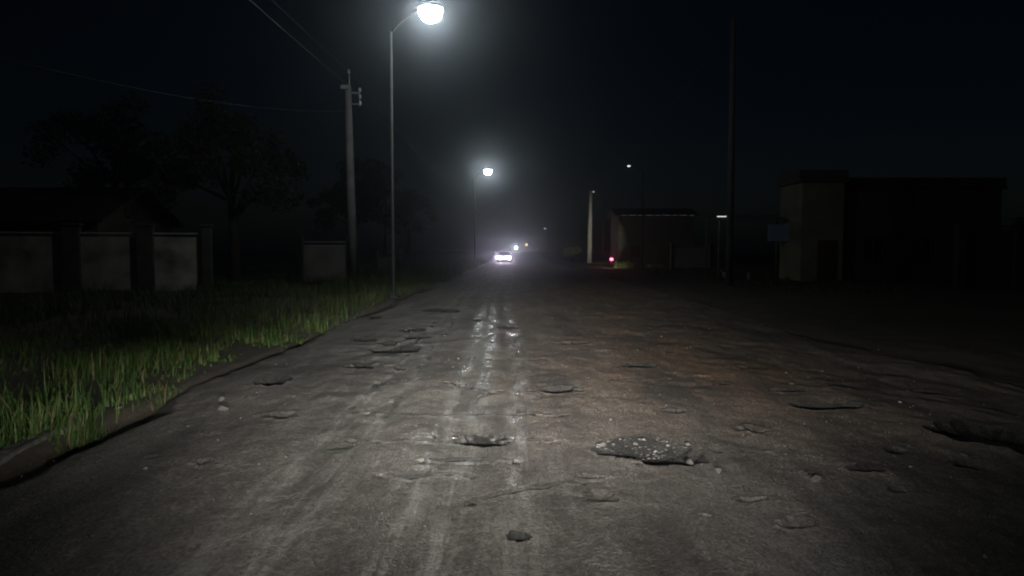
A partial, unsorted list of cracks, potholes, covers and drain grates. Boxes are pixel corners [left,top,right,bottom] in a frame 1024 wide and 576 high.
pothole [252,410,309,421]
pothole [655,407,693,416]
pothole [445,432,518,450]
pothole [782,400,877,412]
pothole [247,374,299,388]
pothole [494,526,545,547]
pothole [914,419,1024,457]
pothole [531,384,590,395]
pothole [583,434,718,469]
pothole [361,345,427,354]
pothole [836,460,897,476]
